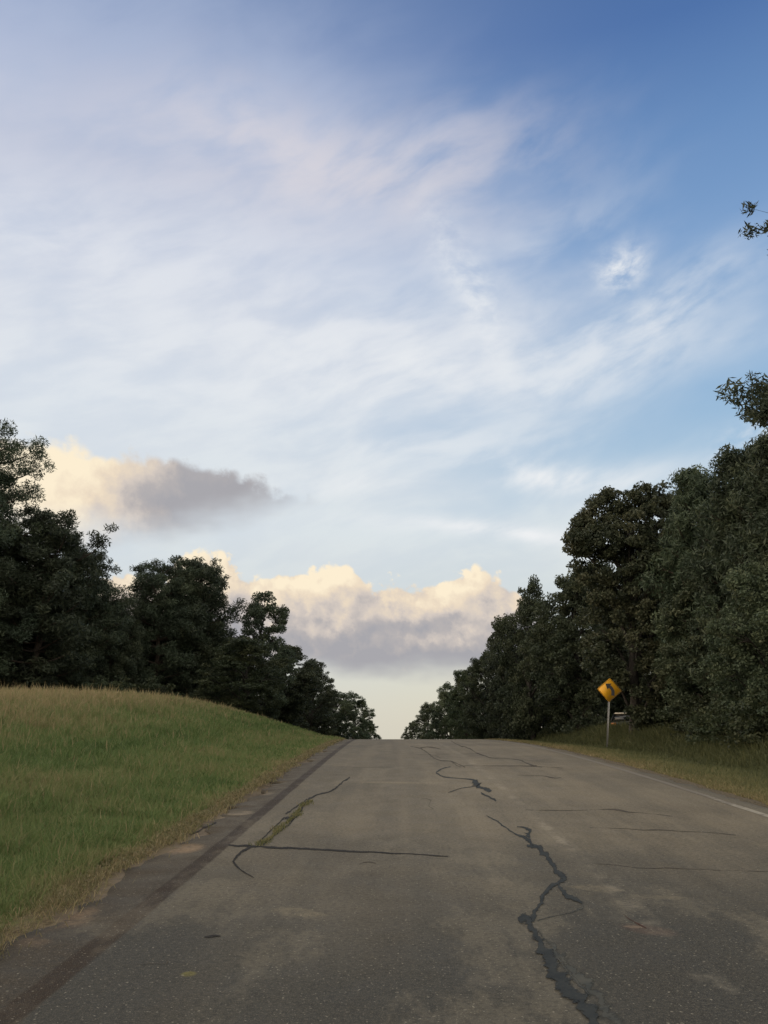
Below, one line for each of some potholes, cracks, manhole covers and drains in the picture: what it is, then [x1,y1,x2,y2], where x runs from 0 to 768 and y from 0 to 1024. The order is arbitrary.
crack [550,809,733,835]
crack [228,777,448,878]
crack [410,742,561,778]
